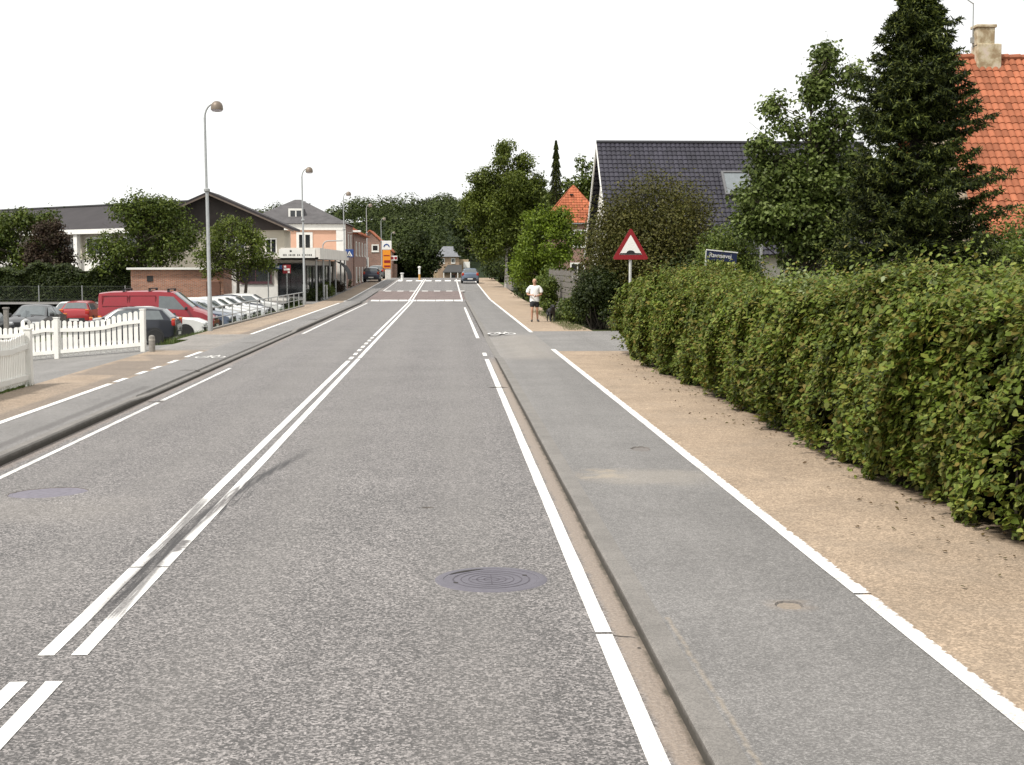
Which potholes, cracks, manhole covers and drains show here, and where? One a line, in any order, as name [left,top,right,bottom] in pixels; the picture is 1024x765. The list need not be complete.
manhole cover [7,487,89,498]
manhole cover [435,567,548,593]
